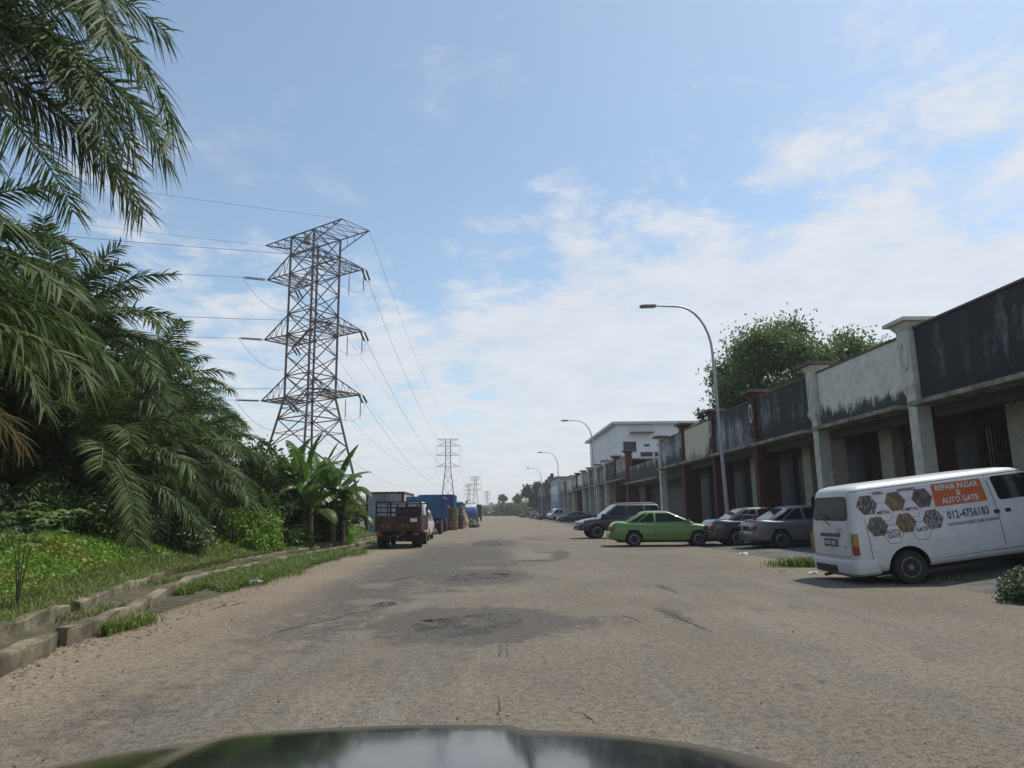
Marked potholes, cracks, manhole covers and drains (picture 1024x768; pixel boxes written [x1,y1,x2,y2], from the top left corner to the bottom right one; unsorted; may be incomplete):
crack [277,607,379,633]
pothole [447,573,510,582]
pothole [410,613,524,638]
